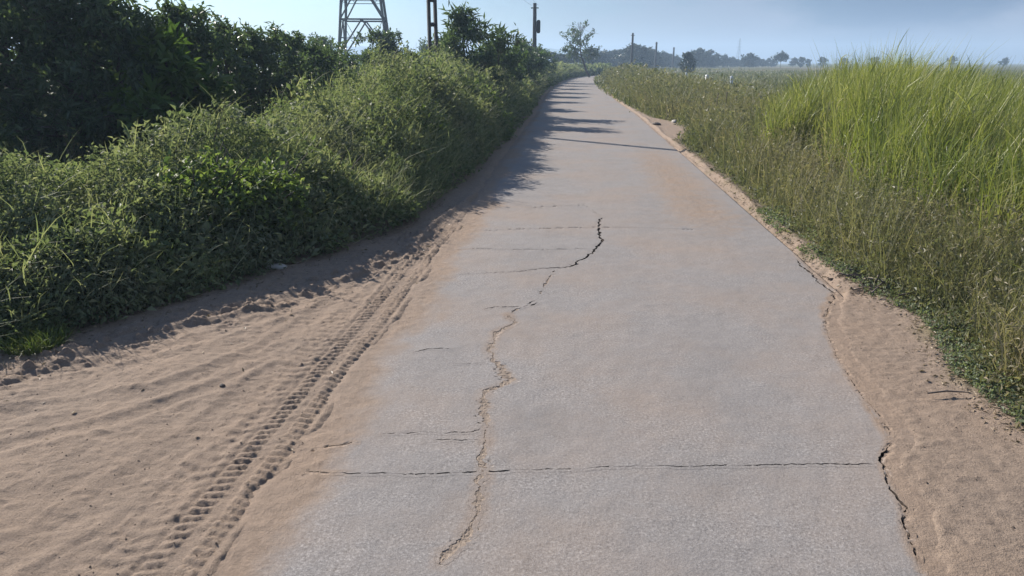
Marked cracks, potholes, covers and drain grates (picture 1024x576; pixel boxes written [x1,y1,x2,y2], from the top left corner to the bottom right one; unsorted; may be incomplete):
crack [314,205,606,565]
crack [794,259,926,574]
